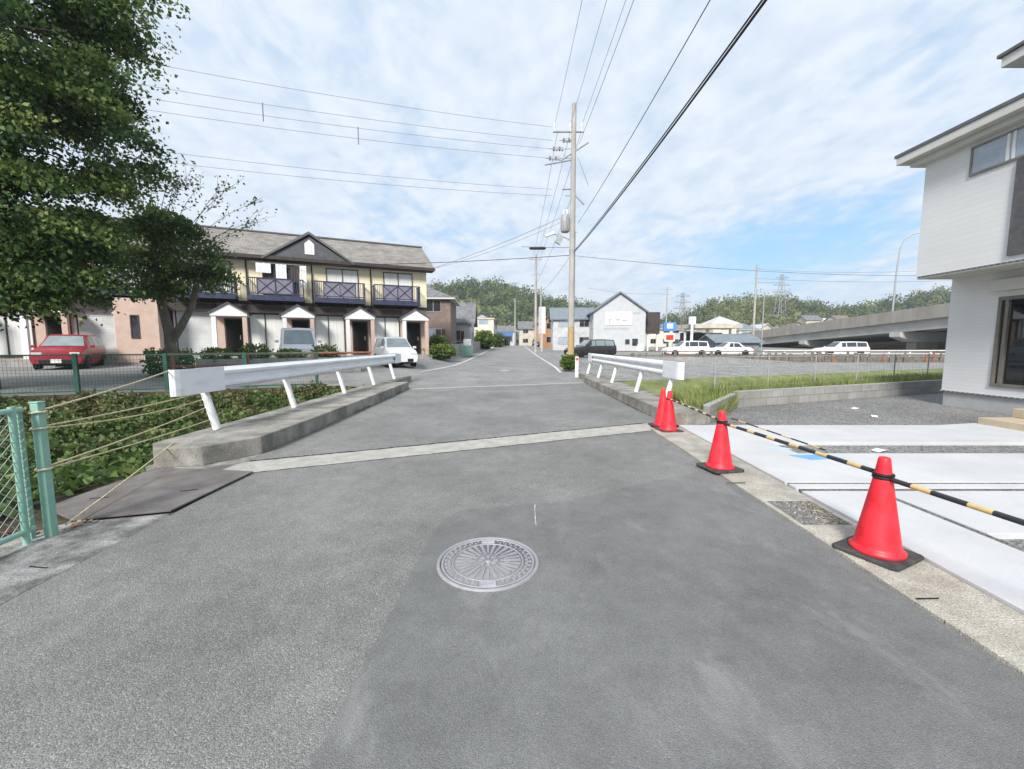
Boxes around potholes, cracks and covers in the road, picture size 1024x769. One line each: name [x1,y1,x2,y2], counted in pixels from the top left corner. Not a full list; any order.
manhole cover [436,537,539,592]
drain grate [767,501,851,525]
